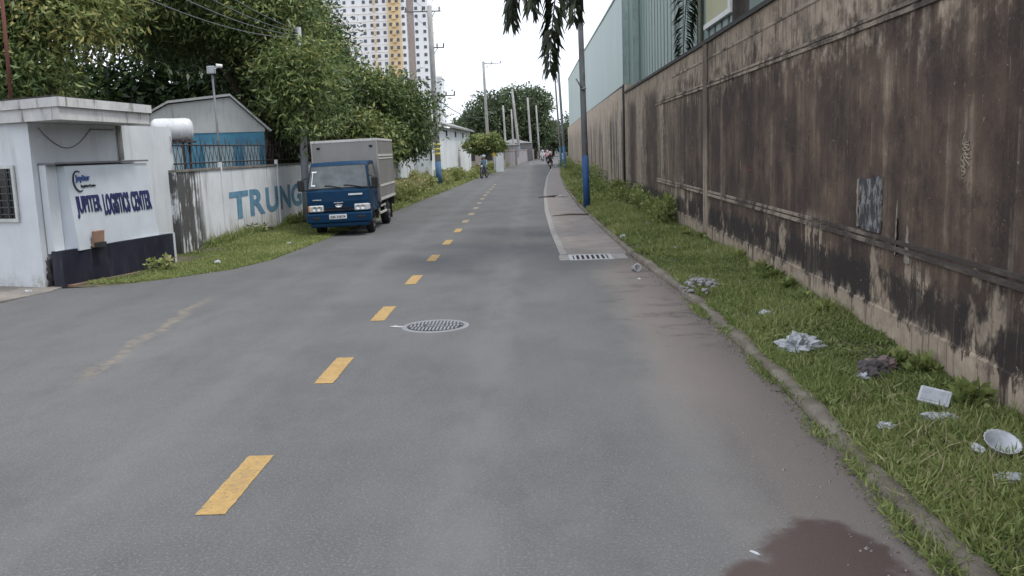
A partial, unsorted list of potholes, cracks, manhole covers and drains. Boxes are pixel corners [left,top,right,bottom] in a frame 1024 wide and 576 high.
manhole cover [391,319,469,333]
drain grate [559,253,629,261]
